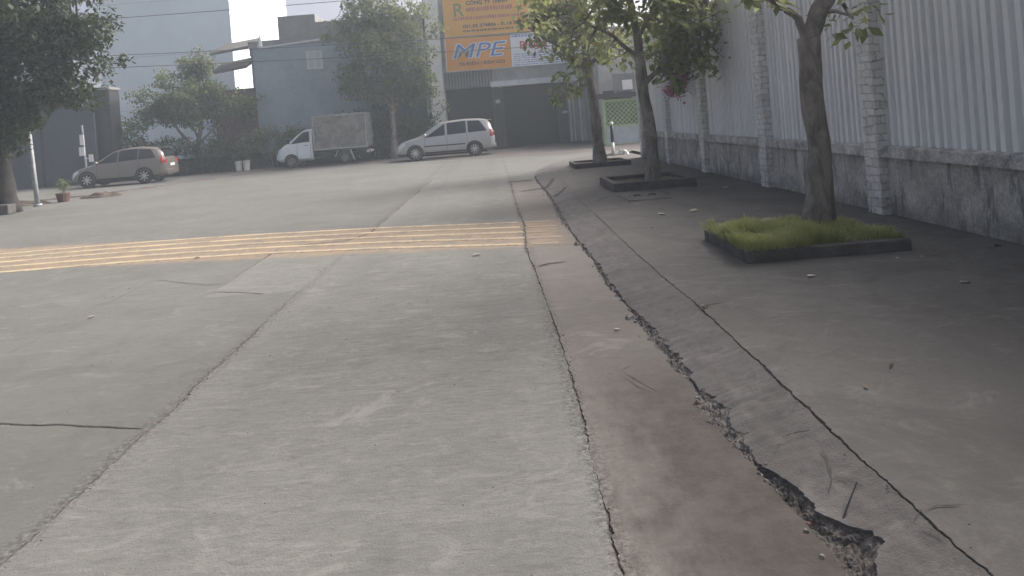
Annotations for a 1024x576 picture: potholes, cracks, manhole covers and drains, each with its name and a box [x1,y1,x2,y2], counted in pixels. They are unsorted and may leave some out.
manhole cover [616,191,674,202]
crack [510,176,994,576]
